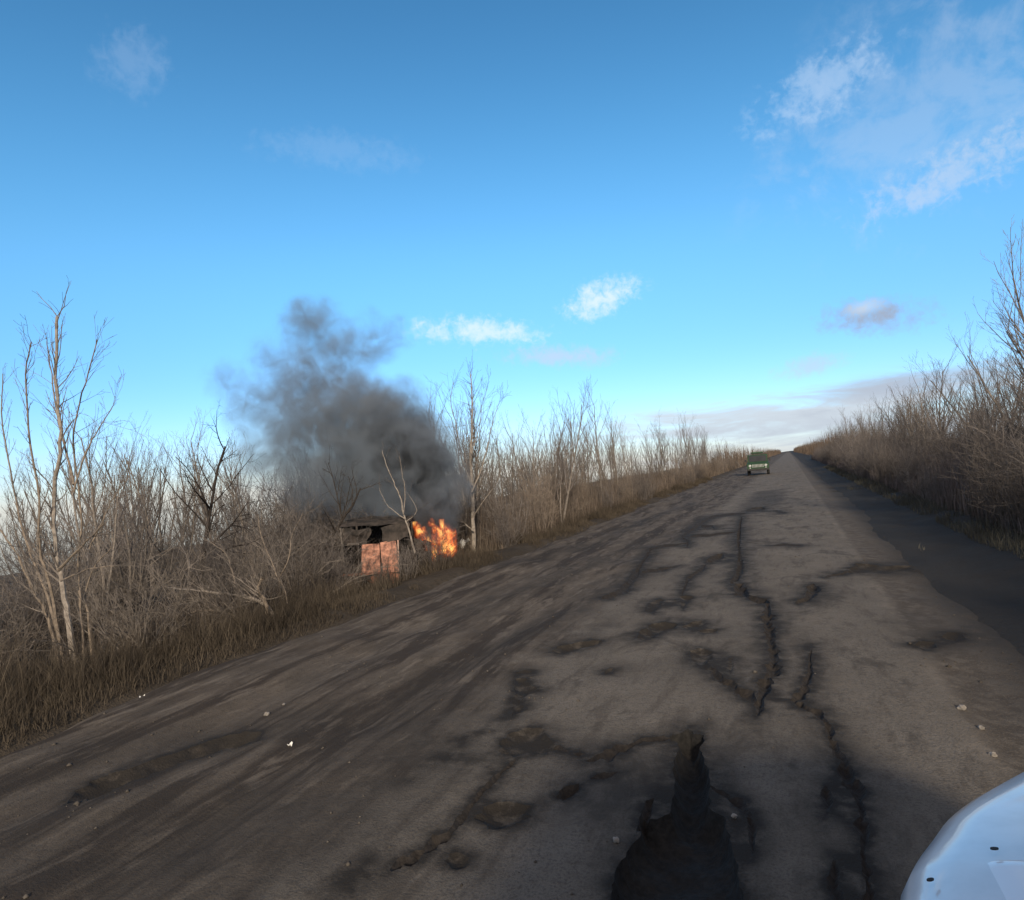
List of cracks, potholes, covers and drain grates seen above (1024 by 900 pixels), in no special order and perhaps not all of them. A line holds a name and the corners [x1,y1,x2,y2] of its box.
pothole [474,801,532,830]
pothole [67,731,262,804]
pothole [499,728,556,758]
pothole [611,729,744,900]
pothole [795,584,821,604]
pothole [556,784,580,800]
pothole [445,852,470,870]
